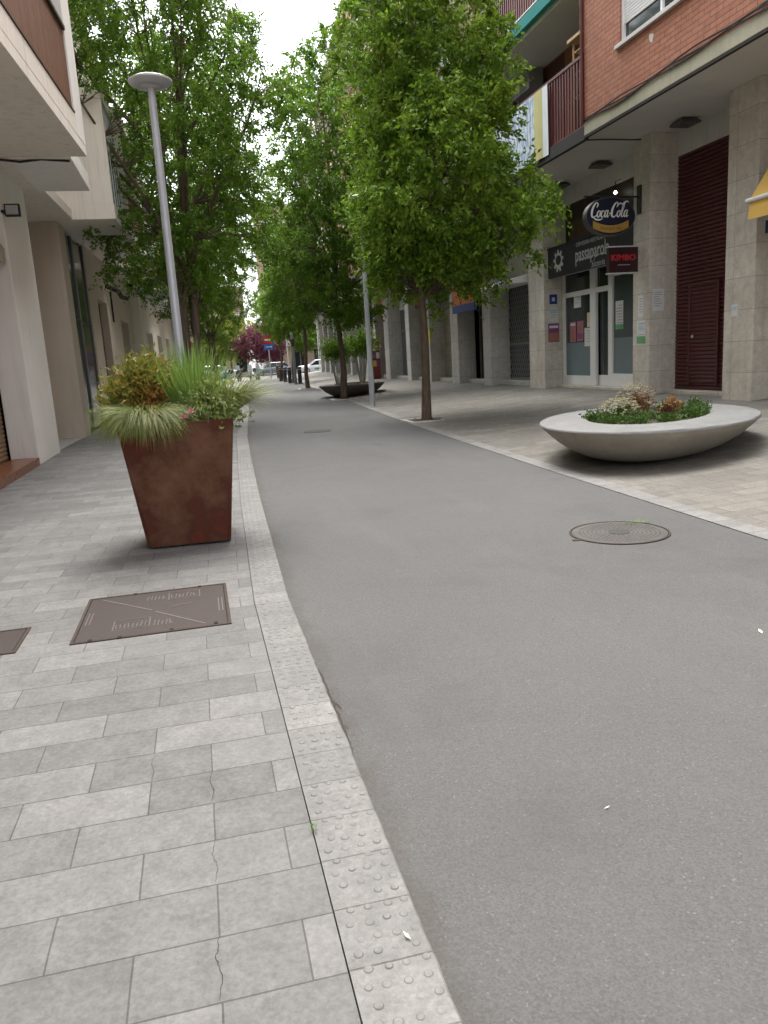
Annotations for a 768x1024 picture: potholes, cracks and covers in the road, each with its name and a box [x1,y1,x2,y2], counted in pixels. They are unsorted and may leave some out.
utility cover [0,627,31,655]
utility cover [69,583,232,646]
manhole cover [569,521,671,545]
